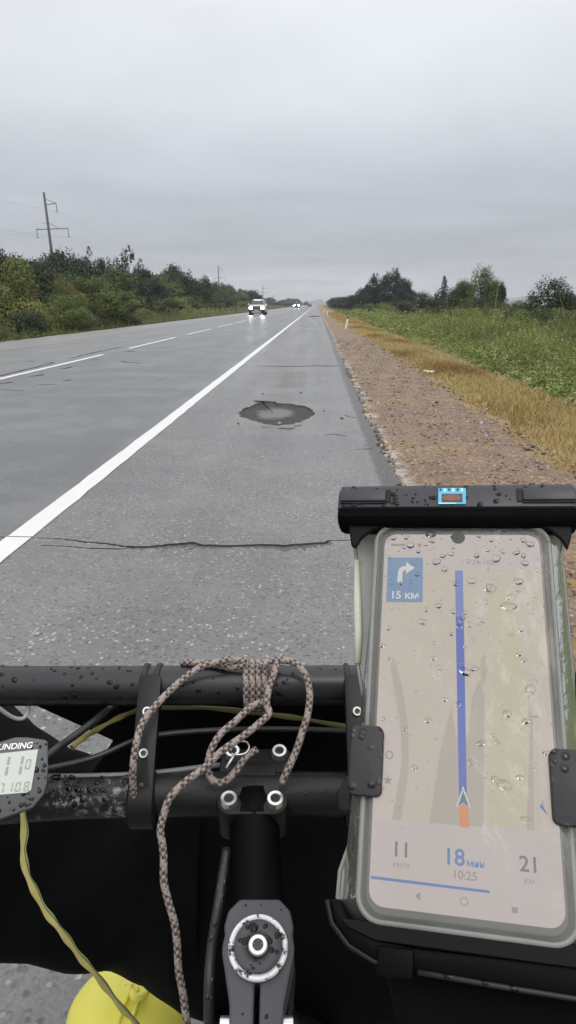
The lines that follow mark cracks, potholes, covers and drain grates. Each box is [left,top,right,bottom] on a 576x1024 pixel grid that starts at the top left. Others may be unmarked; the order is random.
crack [3,537,382,552]
pothole [238,400,315,426]
